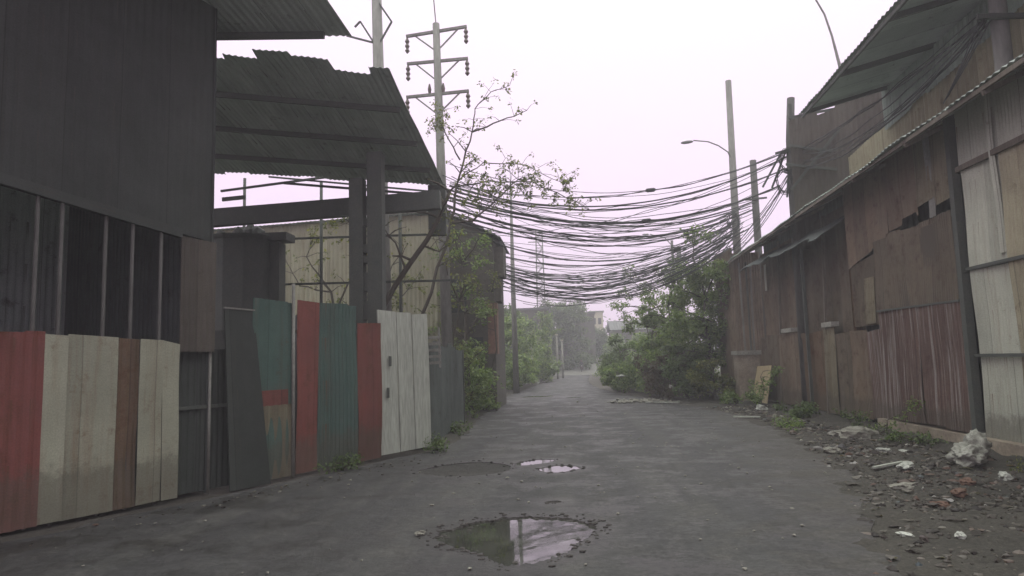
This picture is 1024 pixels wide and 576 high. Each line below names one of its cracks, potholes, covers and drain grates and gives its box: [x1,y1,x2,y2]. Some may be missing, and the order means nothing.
pothole [419,512,612,571]
pothole [535,464,585,473]
